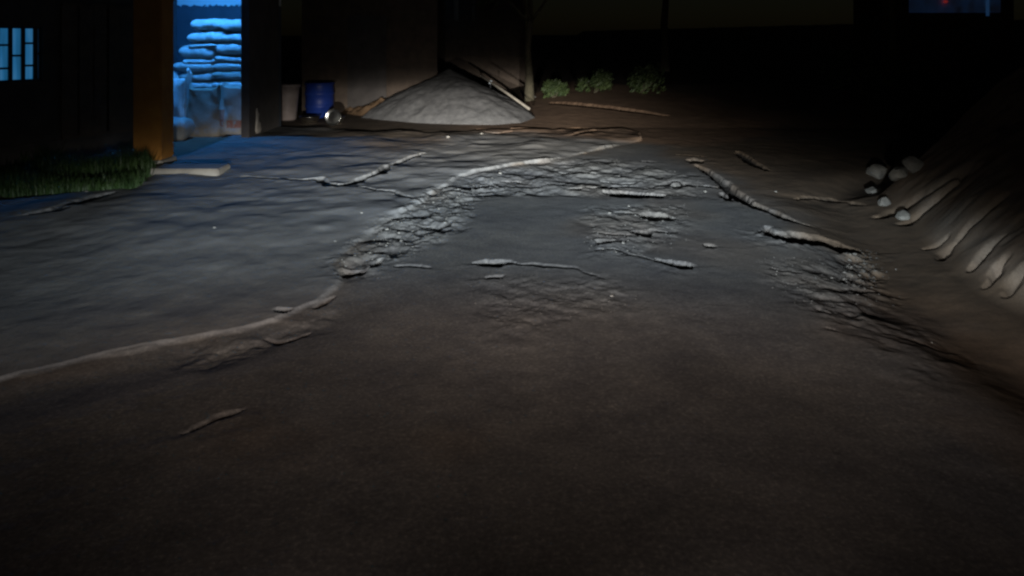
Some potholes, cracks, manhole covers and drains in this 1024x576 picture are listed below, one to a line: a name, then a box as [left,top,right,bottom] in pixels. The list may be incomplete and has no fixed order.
crack [237,152,455,232]
crack [452,151,868,229]
crack [512,211,673,278]
crack [768,266,806,275]
crack [810,285,882,332]
crack [174,405,254,437]
